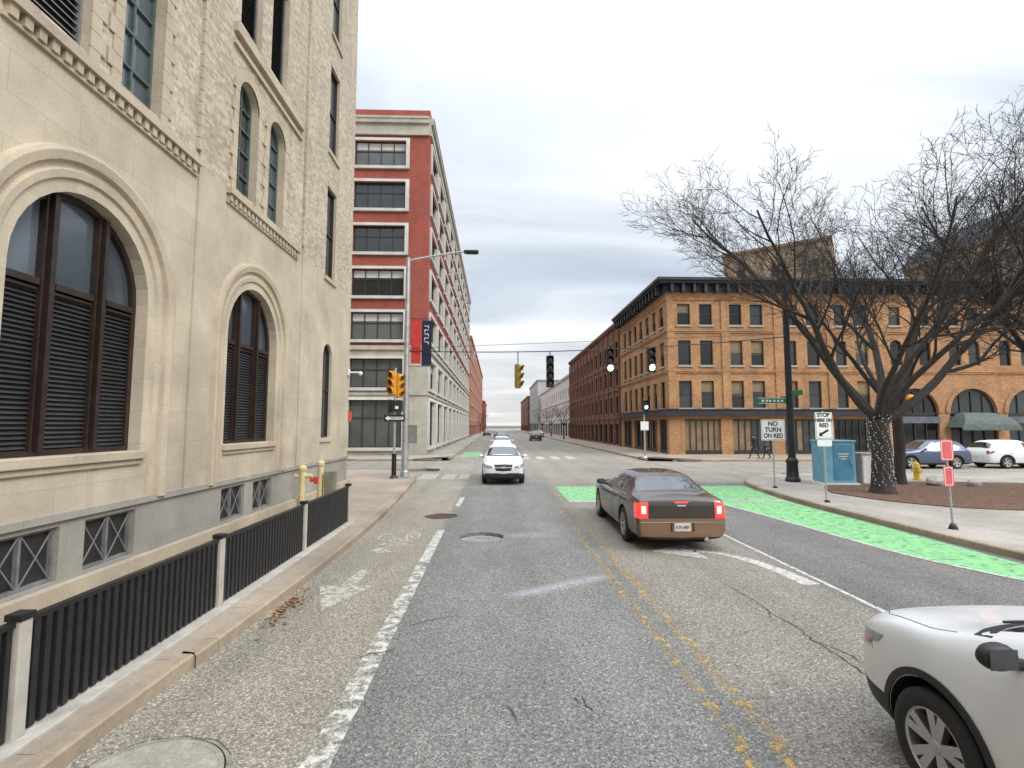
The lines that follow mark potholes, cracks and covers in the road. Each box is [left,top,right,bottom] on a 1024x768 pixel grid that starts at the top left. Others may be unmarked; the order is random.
crack [720,582,865,674]
manhole cover [89,737,230,768]
